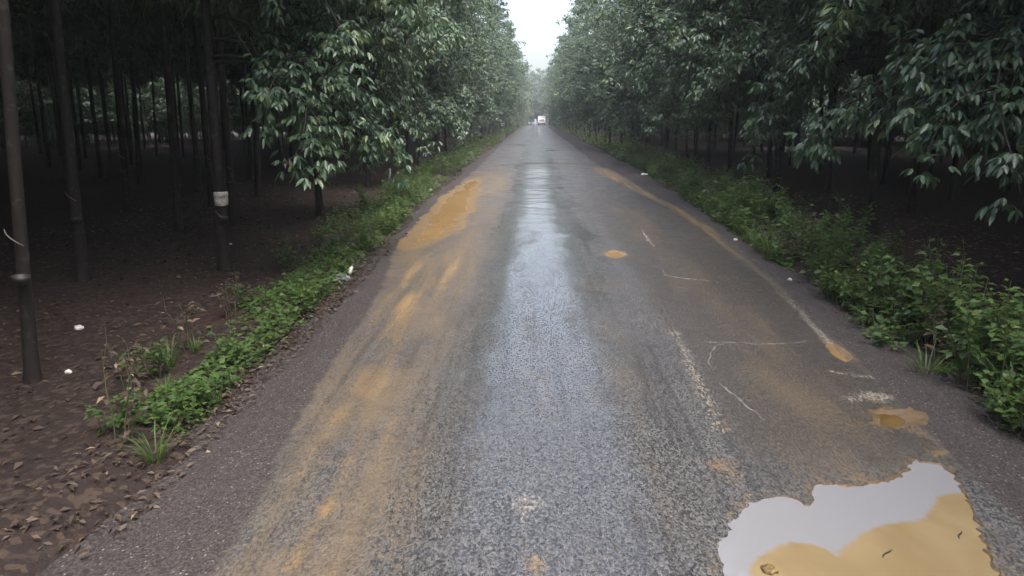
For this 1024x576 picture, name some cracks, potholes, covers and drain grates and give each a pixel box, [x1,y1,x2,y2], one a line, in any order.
pothole [867,407,931,429]
pothole [717,459,1002,576]
crack [649,266,813,420]
pothole [825,344,853,362]
